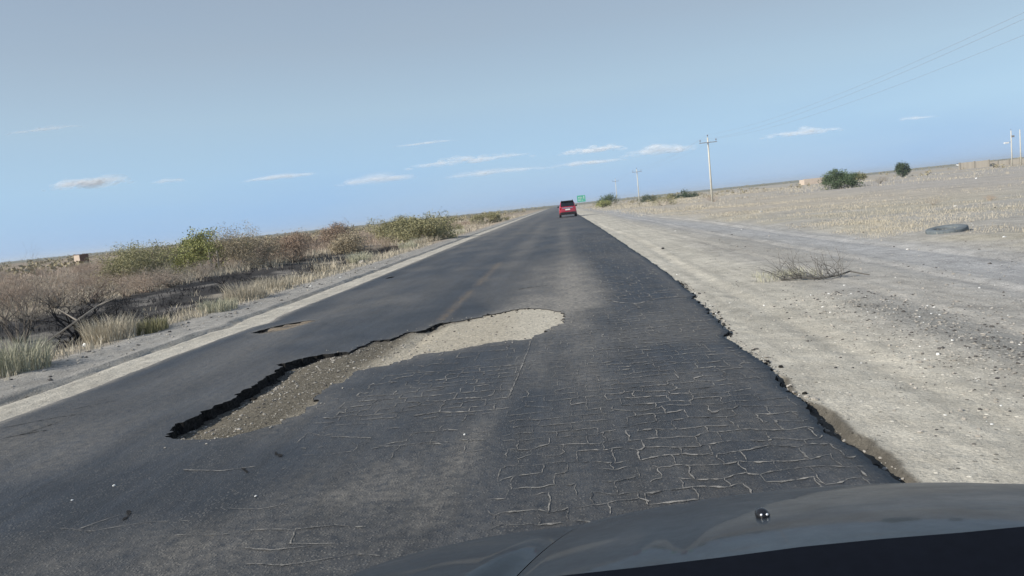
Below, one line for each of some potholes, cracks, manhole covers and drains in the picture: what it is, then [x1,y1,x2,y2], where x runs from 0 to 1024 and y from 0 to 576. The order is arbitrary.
pothole [165,308,566,440]
crack [283,344,520,469]
crack [67,510,380,566]
crack [484,298,870,534]
